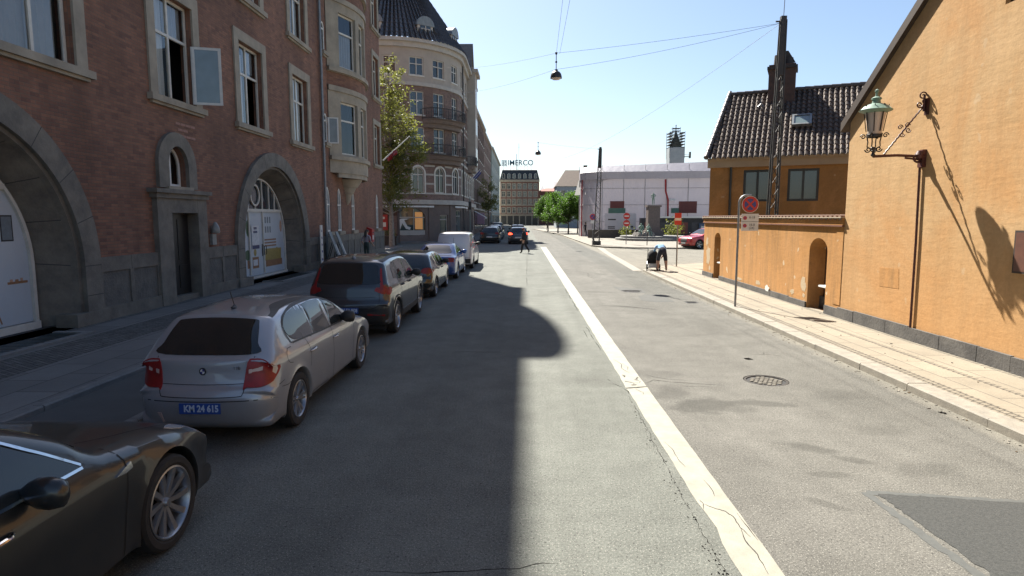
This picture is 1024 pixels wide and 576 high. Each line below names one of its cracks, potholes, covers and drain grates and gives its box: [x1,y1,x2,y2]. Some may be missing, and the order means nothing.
manhole cover [743,375,789,386]
crack [629,397,768,575]
crack [377,563,556,574]
